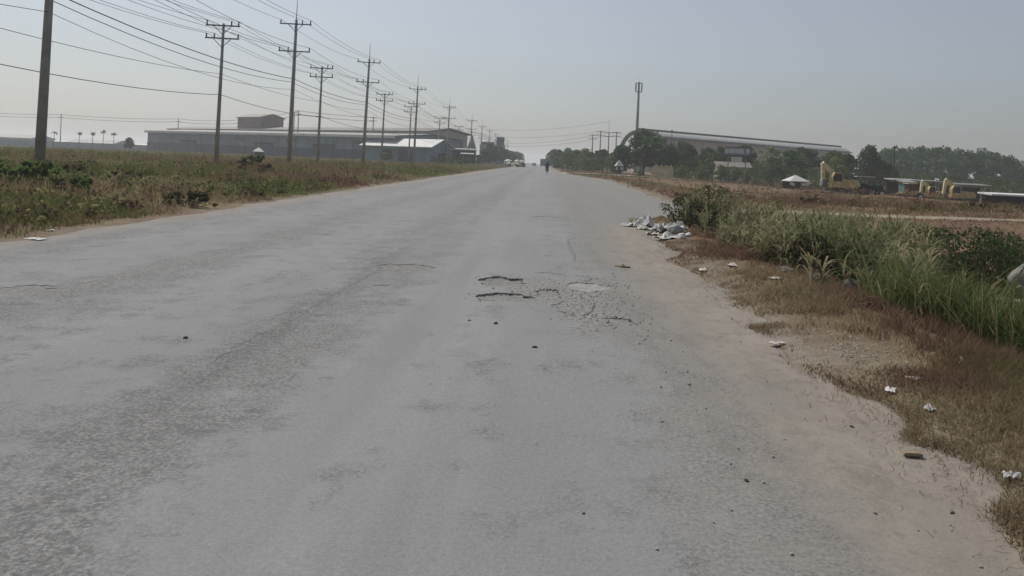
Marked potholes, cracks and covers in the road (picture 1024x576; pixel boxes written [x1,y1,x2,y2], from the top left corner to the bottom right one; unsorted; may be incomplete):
crack [552,237,603,281]
pothole [475,292,536,302]
pothole [478,276,526,286]
crack [551,301,598,317]
